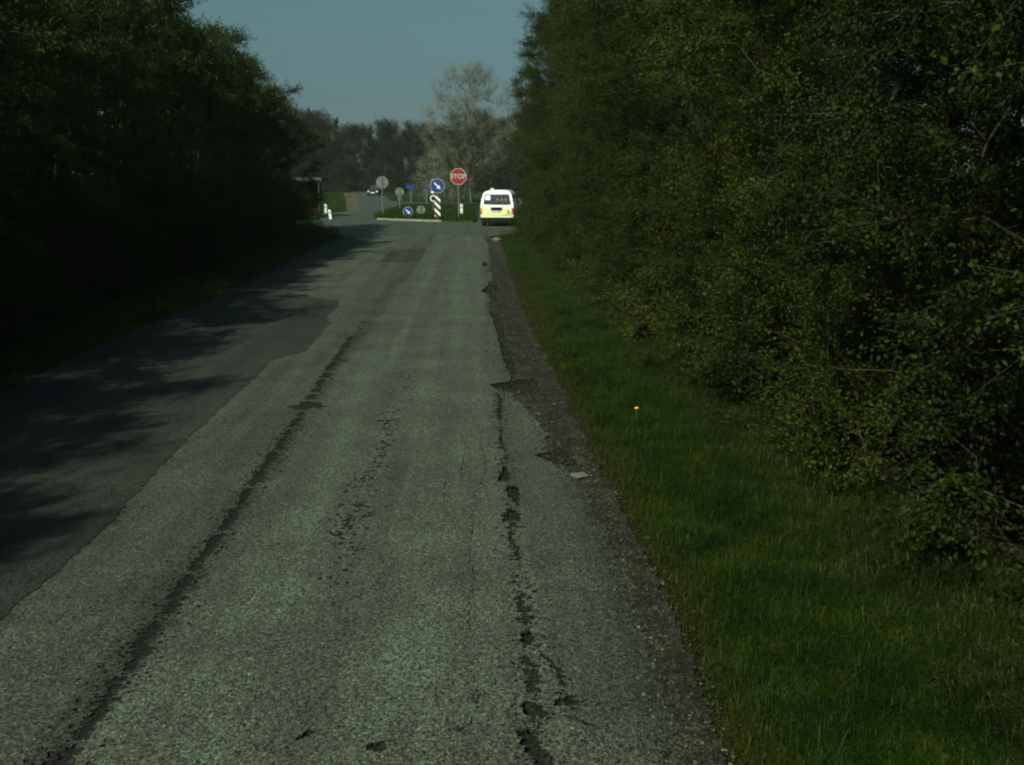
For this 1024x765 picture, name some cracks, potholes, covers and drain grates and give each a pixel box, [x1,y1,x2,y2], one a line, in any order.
pothole [491,378,540,393]
crack [318,369,418,588]
crack [442,393,600,761]
pothole [364,741,388,752]
